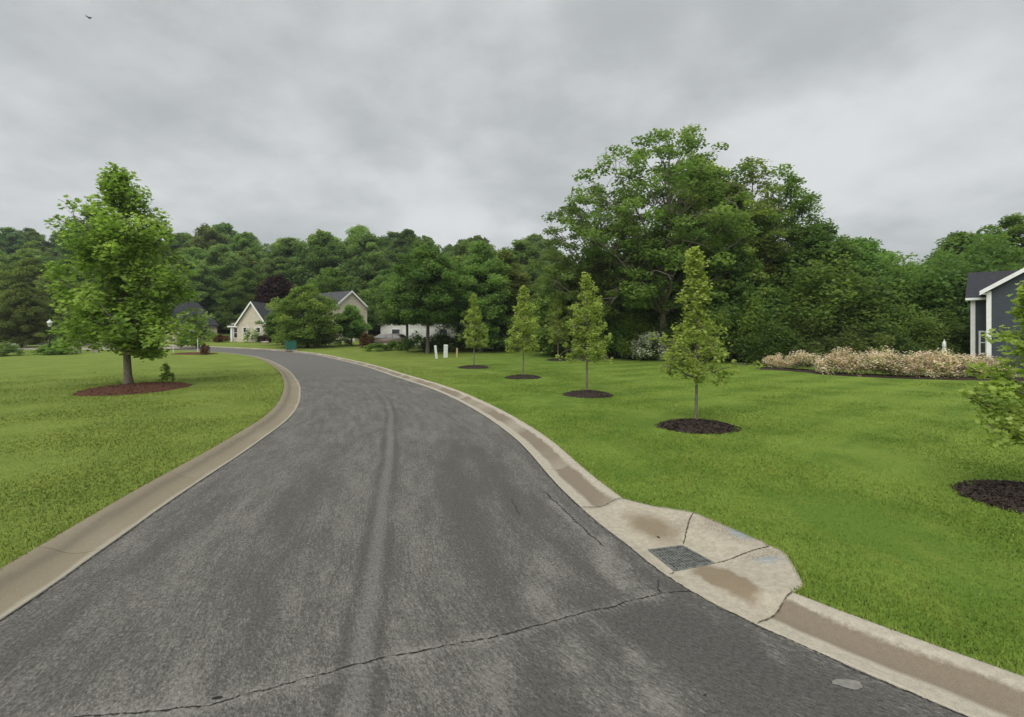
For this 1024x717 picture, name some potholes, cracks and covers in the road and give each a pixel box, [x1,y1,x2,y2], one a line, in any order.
crack [74,593,660,717]
crack [455,399,602,545]
